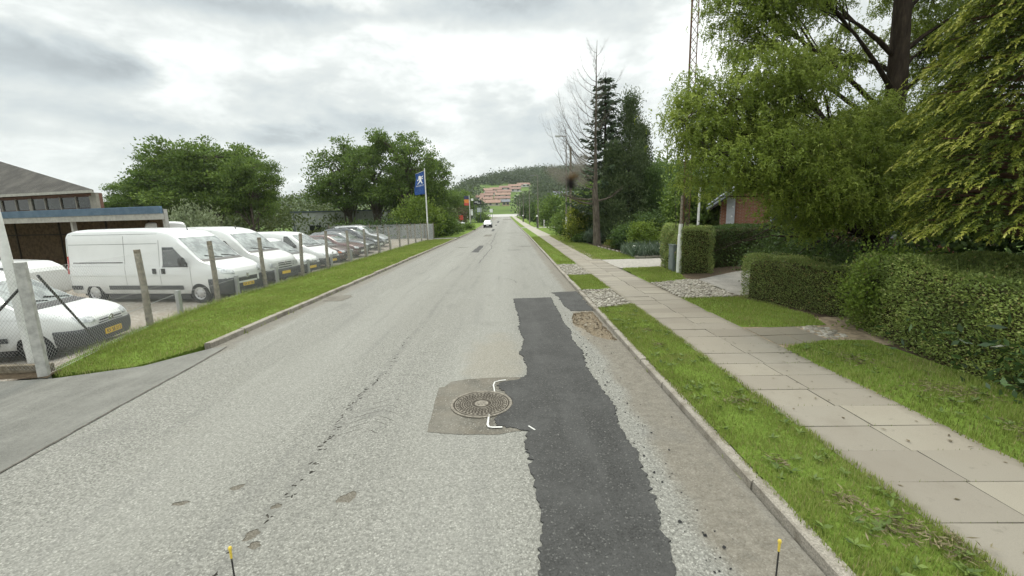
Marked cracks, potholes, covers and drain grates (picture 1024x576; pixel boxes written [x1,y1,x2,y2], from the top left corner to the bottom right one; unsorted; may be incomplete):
crack [213,331,437,576]
pothole [572,312,617,340]
pothole [242,529,261,541]
pothole [335,491,357,503]
manhole cover [451,391,512,418]
